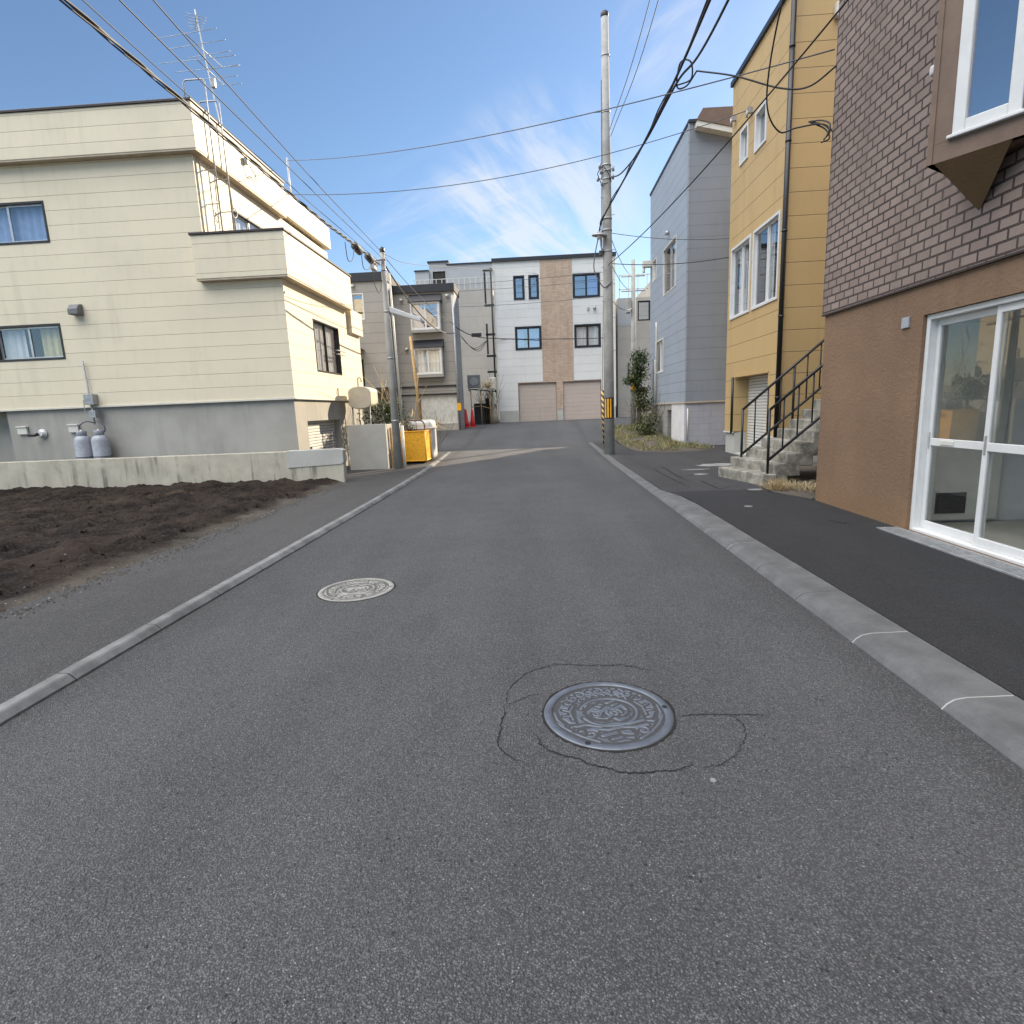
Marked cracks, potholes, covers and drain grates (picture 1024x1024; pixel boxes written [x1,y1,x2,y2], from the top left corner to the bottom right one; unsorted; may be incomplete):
manhole cover [541,681,677,753]
manhole cover [316,578,396,602]
crack [497,664,768,774]
